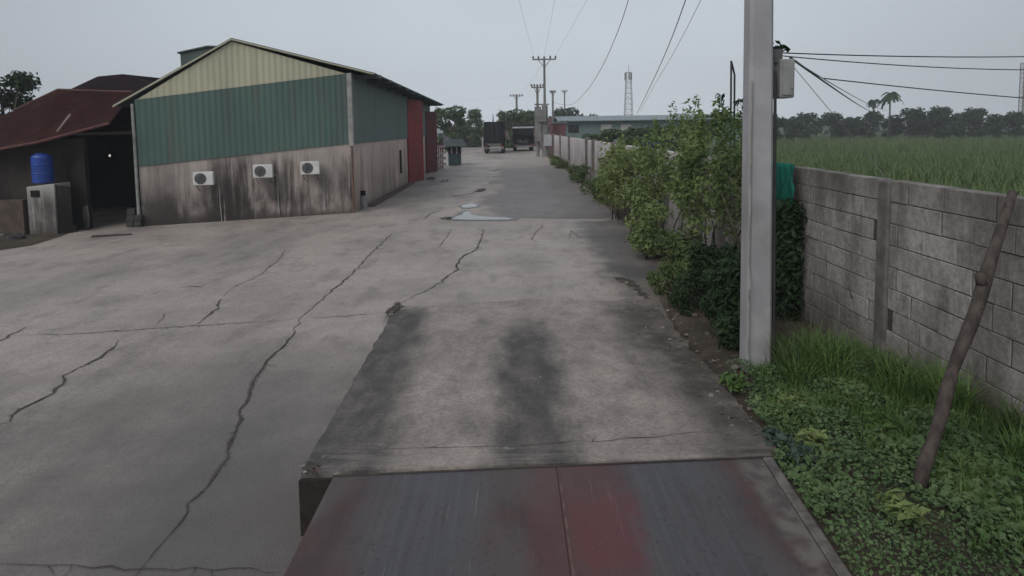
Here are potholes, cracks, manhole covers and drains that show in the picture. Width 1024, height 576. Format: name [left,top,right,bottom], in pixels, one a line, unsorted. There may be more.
crack [5,342,117,423]
pothole [613,276,653,299]
pothole [384,302,404,317]
crack [400,192,486,303]
crack [136,232,394,574]
